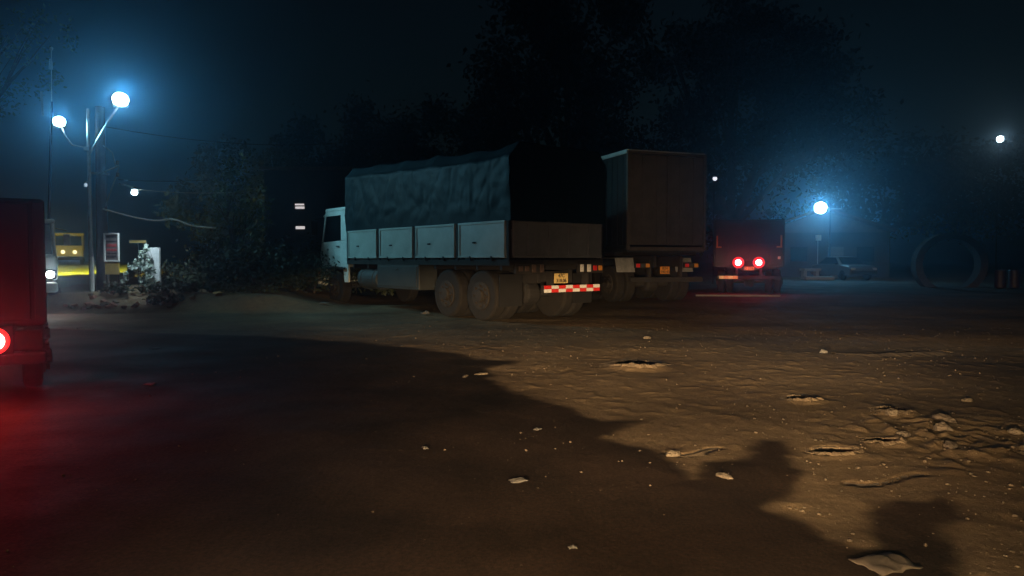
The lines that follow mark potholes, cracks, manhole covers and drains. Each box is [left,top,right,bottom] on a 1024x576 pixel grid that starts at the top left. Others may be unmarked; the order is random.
crack [844,474,926,487]
pothole [868,405,918,415]
crack [665,447,720,457]
pothole [601,358,672,369]
pothole [804,446,865,456]
pothole [857,436,909,446]
pothole [779,394,824,402]
